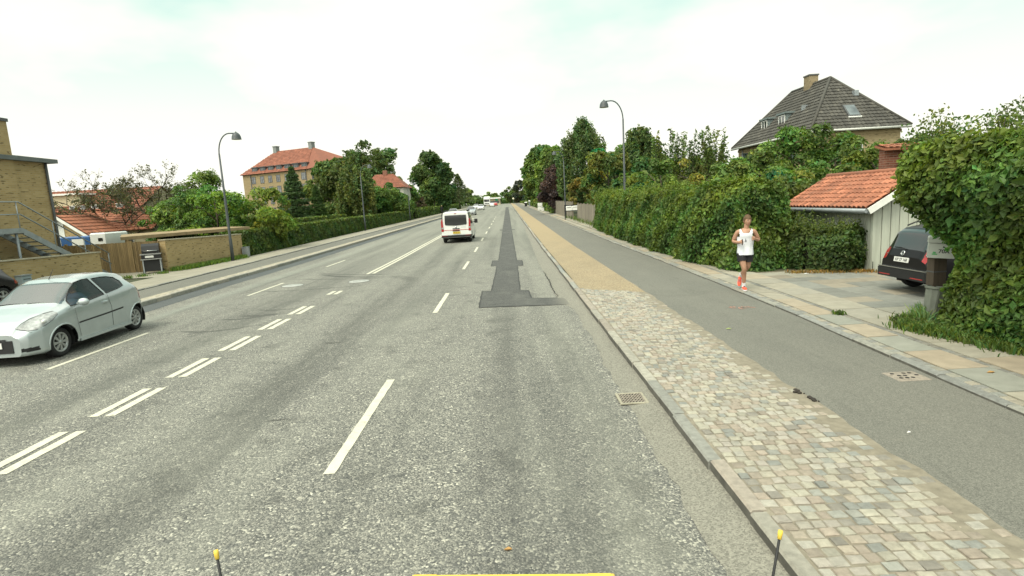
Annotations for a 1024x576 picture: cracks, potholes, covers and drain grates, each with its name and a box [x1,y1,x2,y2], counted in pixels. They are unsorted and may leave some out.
drain grate [882,371,932,382]
drain grate [615,392,649,405]
